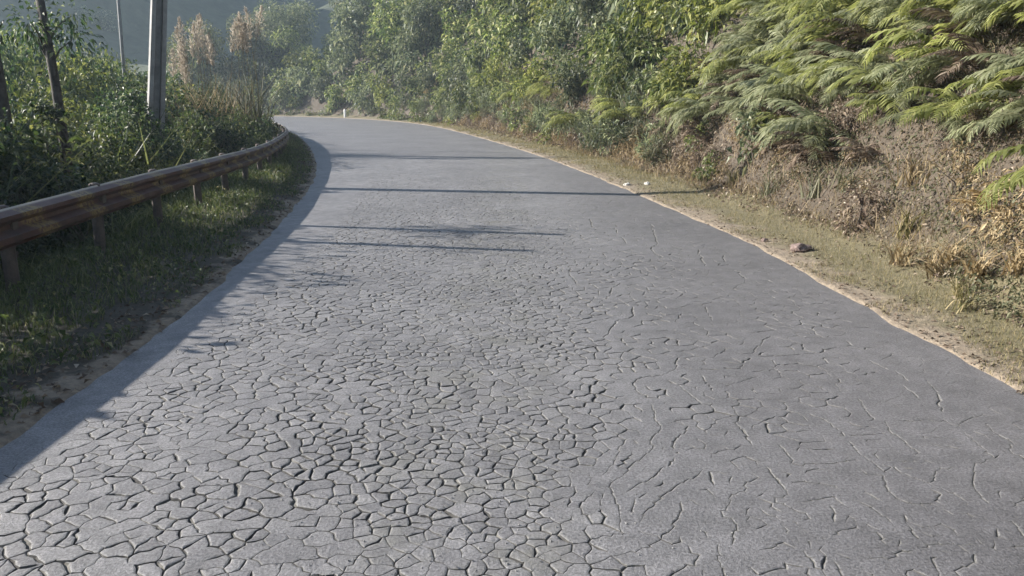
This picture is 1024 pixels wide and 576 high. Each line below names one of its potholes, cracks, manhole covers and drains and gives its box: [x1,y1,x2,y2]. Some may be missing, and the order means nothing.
crack [0,160,1024,576]
